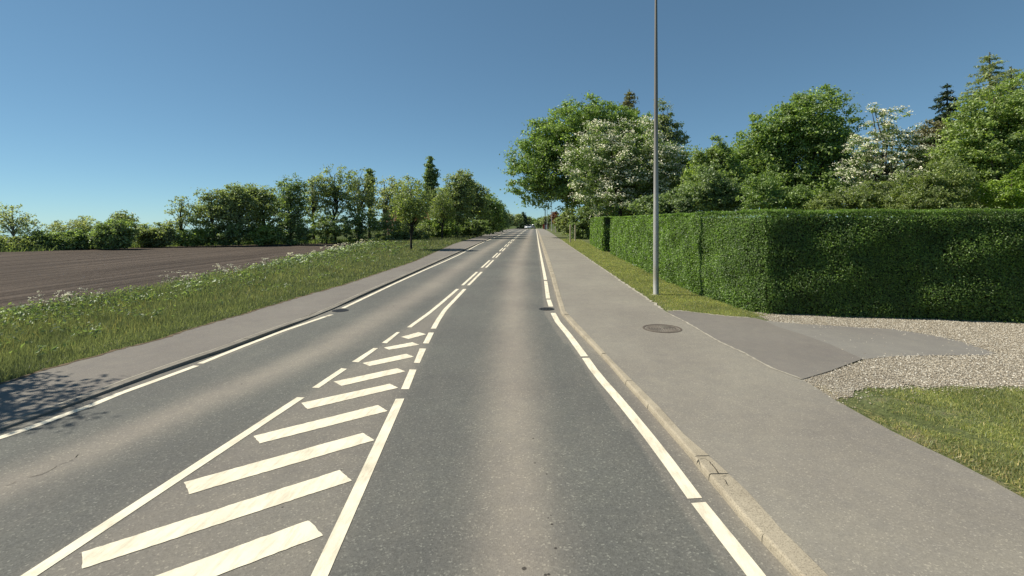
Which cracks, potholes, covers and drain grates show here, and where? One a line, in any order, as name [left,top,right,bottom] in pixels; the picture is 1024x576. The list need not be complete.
manhole cover [643,324,682,333]
